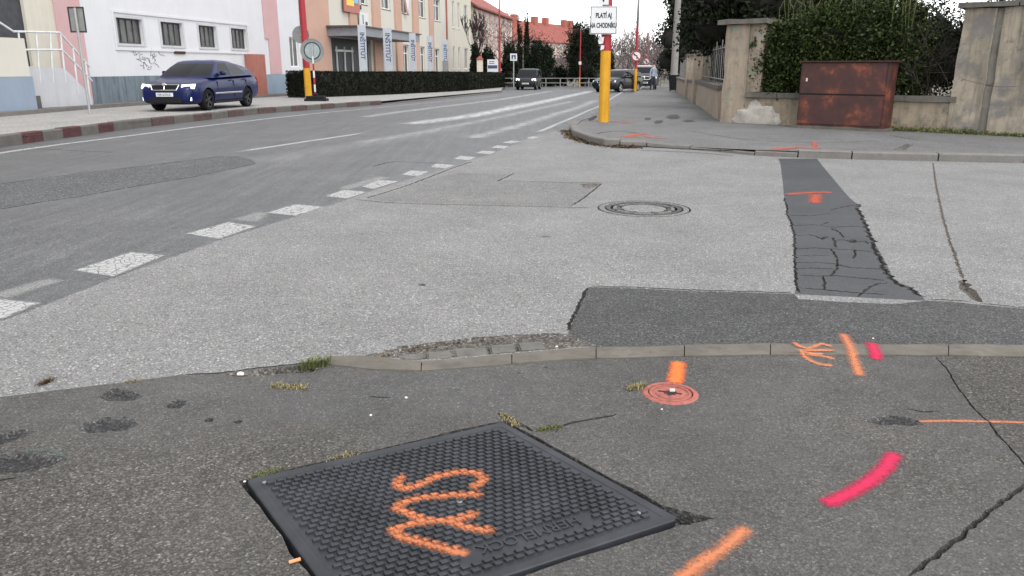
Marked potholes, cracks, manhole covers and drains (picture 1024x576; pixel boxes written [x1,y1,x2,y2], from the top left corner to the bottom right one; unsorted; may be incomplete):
pothole [164,400,187,409]
pothole [864,415,923,426]
manhole cover [239,420,715,576]
crack [783,163,982,302]
pothole [100,388,143,402]
pothole [79,417,139,433]
crack [499,413,616,432]
manhole cover [642,382,699,405]
crack [910,357,1024,465]
pothole [0,452,67,474]
manhole cover [597,201,691,217]
pothole [0,429,34,445]
